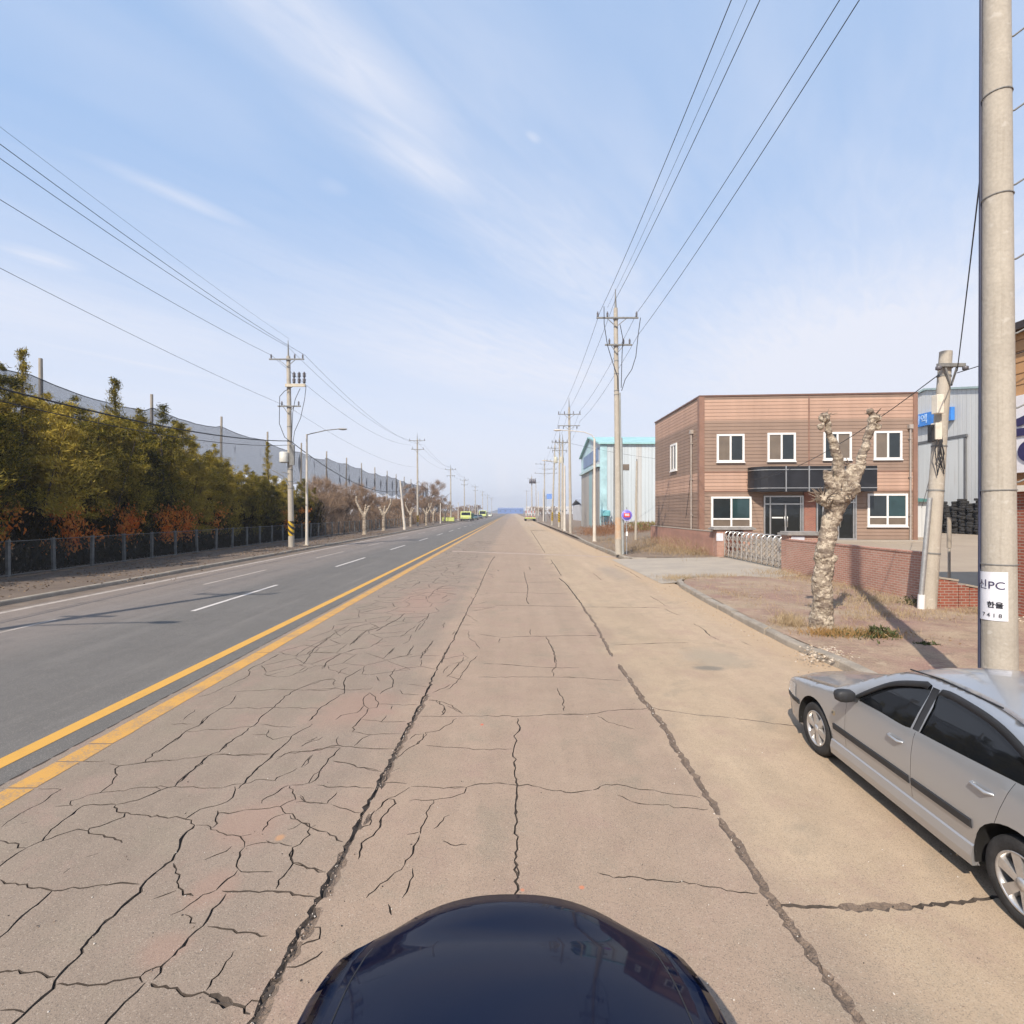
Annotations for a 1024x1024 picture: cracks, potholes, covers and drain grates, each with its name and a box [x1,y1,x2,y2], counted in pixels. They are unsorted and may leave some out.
crack [366,630,794,915]
crack [0,541,489,1024]
